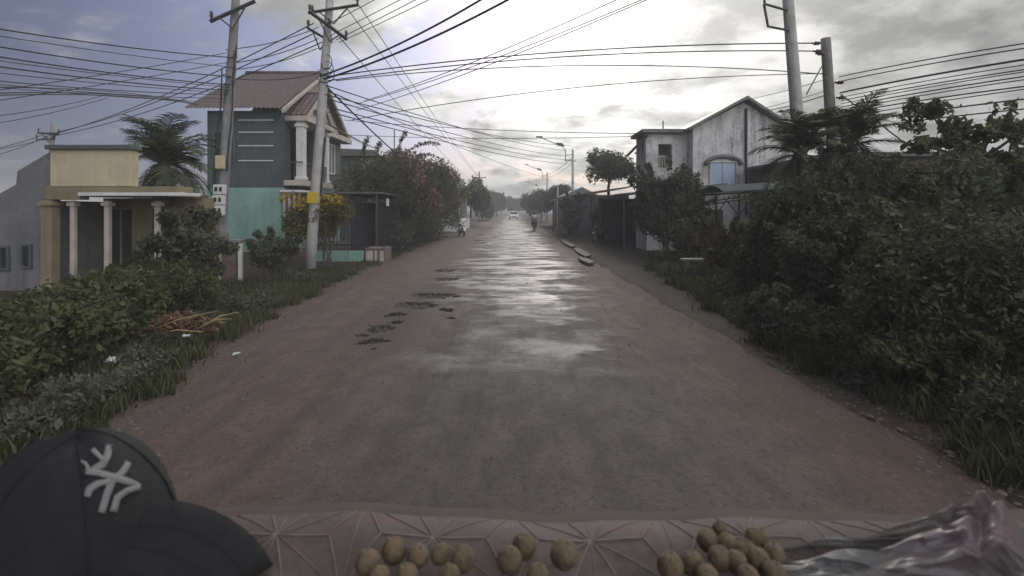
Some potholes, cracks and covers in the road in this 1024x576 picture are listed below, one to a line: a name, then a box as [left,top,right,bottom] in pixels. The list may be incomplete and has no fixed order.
pothole [393,301,439,310]
pothole [366,324,395,333]
